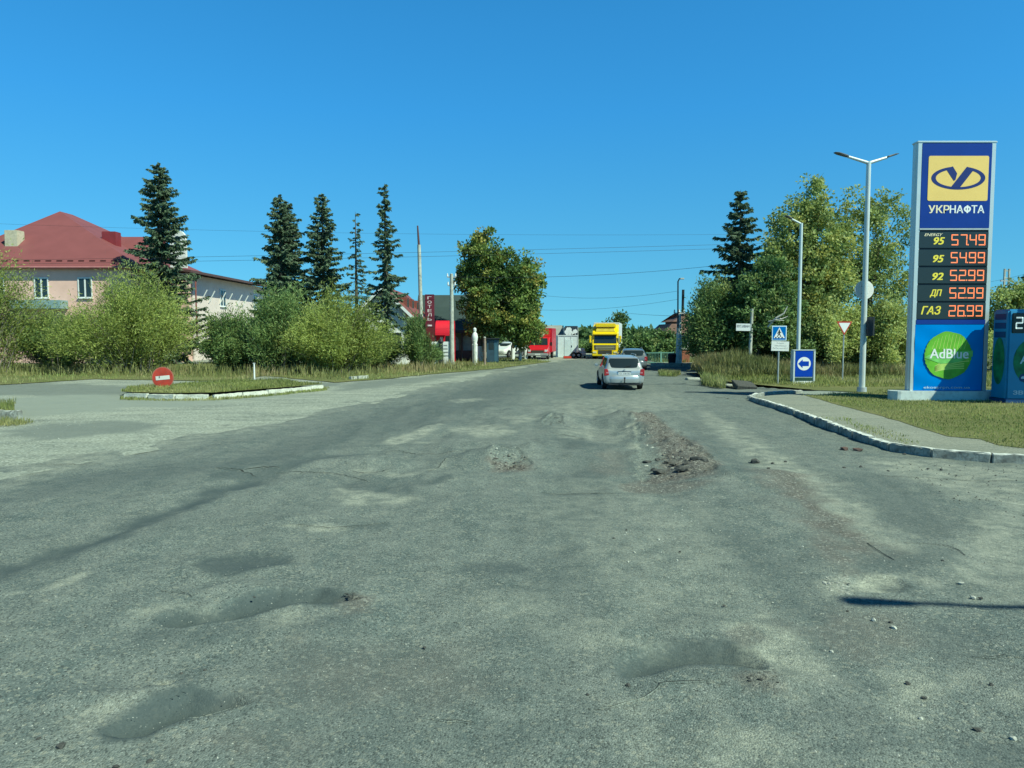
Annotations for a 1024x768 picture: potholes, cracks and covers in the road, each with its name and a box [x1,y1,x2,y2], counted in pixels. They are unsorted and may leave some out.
pothole [64,678,277,756]
pothole [133,583,379,635]
pothole [593,632,794,686]
crack [216,450,465,482]
pothole [173,549,312,583]
pothole [536,411,571,426]
pothole [481,444,541,472]
pothole [623,409,732,486]
crack [590,664,753,710]
